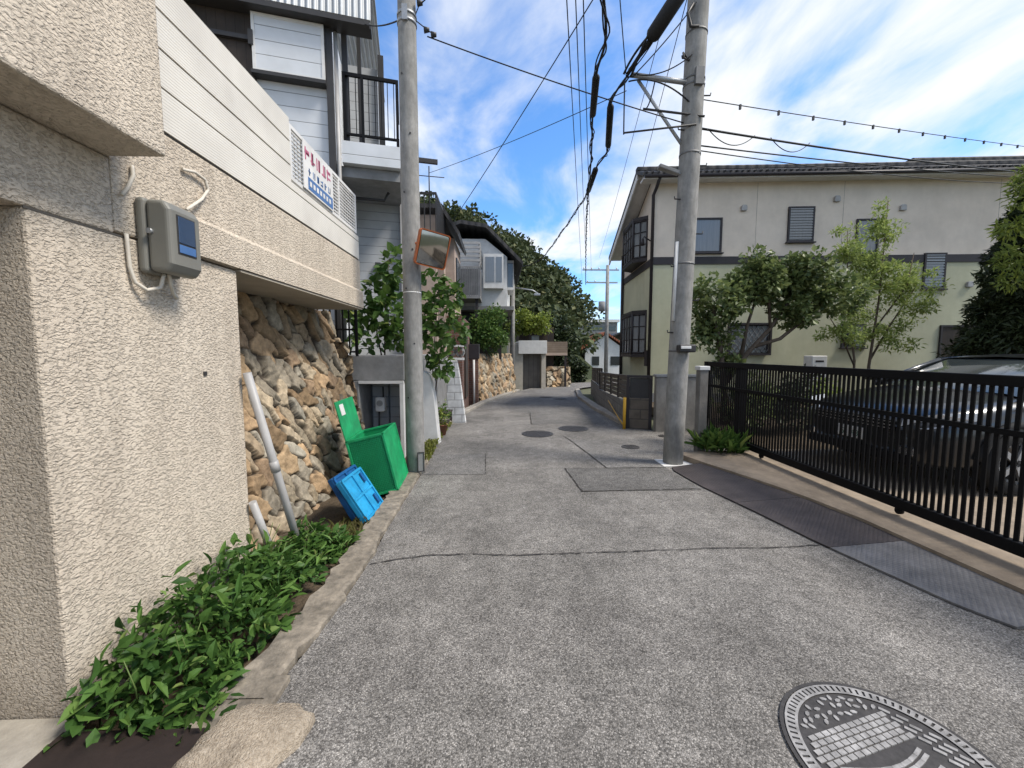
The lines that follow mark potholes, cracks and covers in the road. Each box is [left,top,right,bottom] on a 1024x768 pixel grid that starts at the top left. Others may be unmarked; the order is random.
manhole cover [779,682,1000,768]
crack [369,544,820,565]
